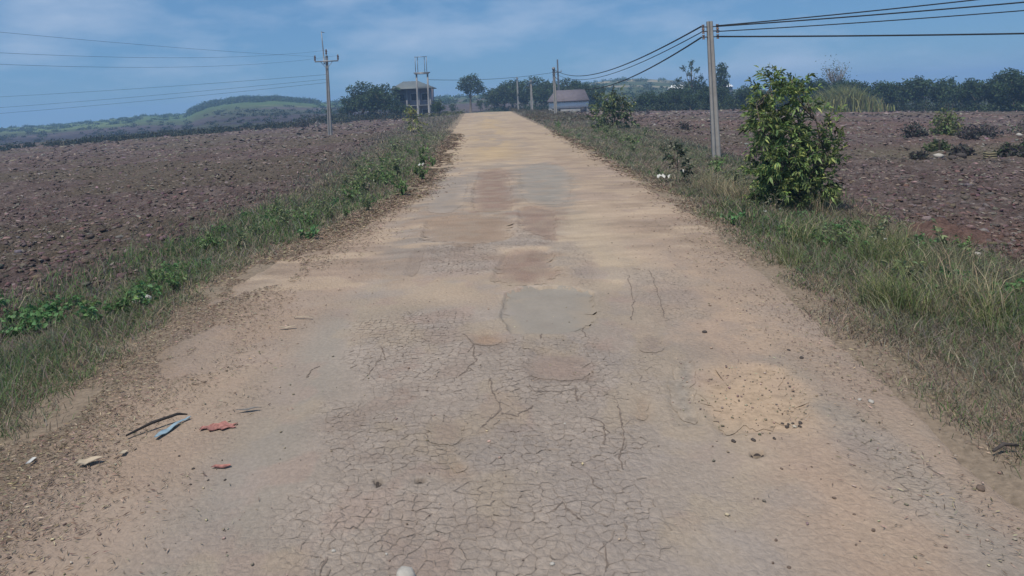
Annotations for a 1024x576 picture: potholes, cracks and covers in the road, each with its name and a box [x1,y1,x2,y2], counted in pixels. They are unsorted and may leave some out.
crack [624,267,711,327]
crack [340,307,667,519]
crack [272,475,675,576]
crack [313,401,484,481]
